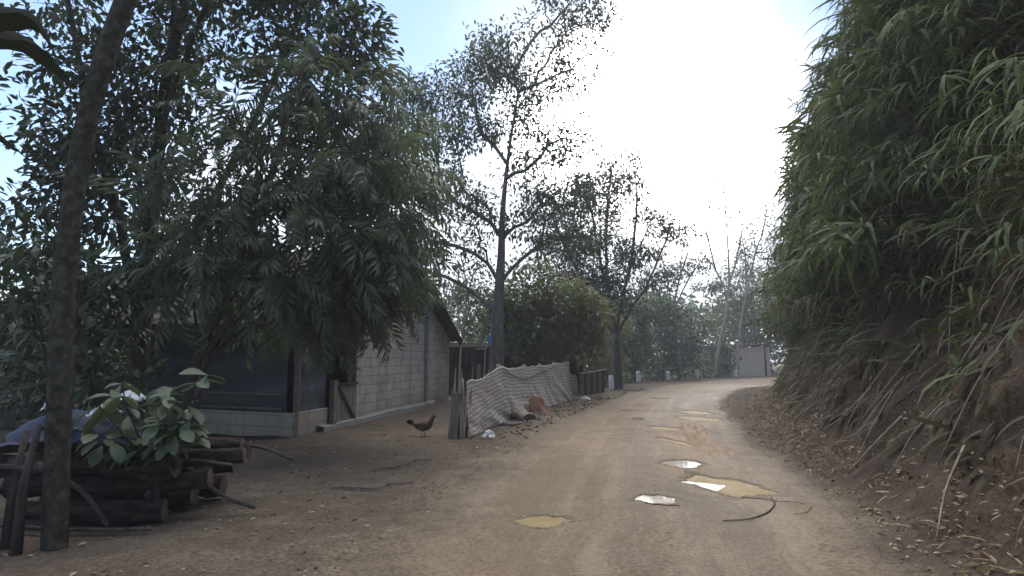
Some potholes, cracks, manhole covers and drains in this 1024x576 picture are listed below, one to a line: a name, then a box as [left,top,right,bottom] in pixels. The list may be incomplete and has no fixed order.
crack [328,459,432,492]
pothole [627,493,682,505]
pothole [669,470,790,499]
pothole [652,436,701,448]
pothole [654,459,711,469]
pothole [503,513,582,529]
